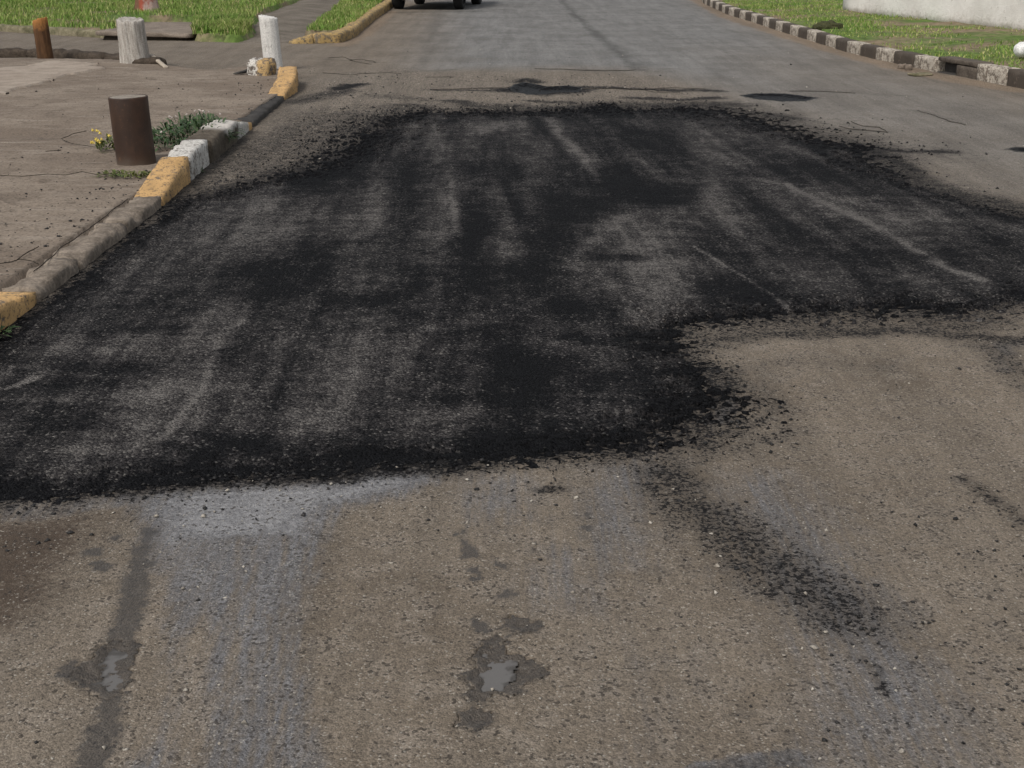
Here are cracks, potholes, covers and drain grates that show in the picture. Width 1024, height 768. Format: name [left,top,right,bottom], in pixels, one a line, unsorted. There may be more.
pothole [459,635,550,702]
pothole [454,705,492,733]
crack [45,131,101,152]
pothole [498,615,545,634]
crack [331,57,401,75]
pothole [68,640,143,700]
crack [0,246,39,265]
crack [840,121,888,133]
pothole [740,93,820,102]
